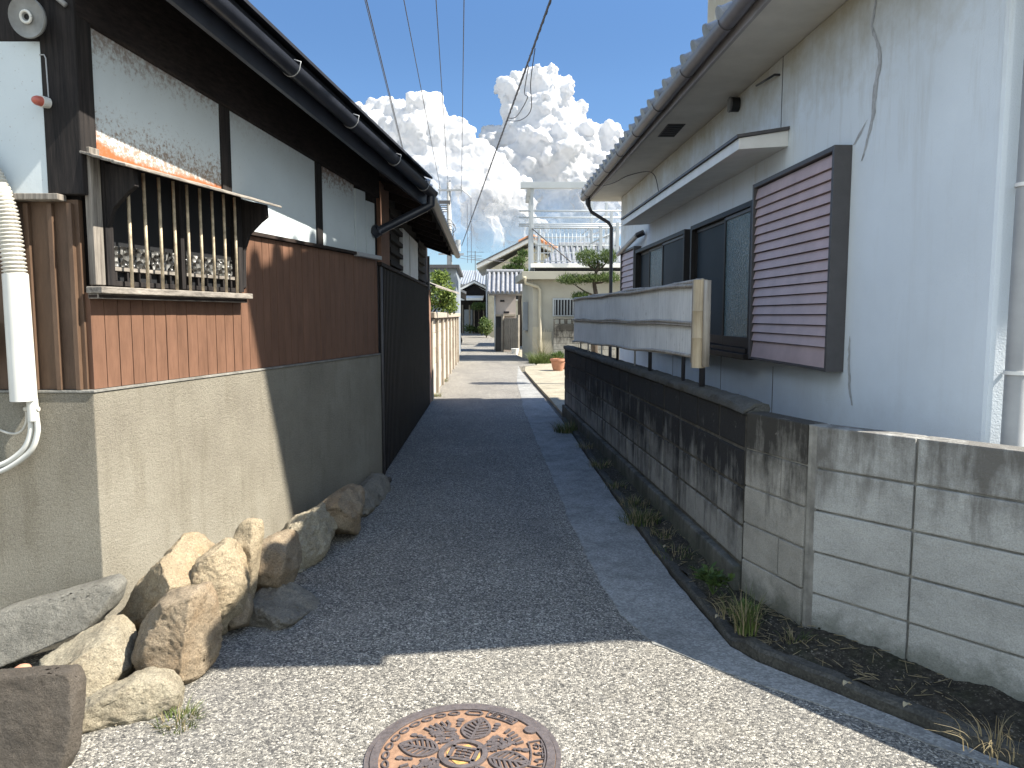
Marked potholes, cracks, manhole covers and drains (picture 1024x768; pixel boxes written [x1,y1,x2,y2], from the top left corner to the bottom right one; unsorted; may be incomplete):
manhole cover [364,703,561,768]
